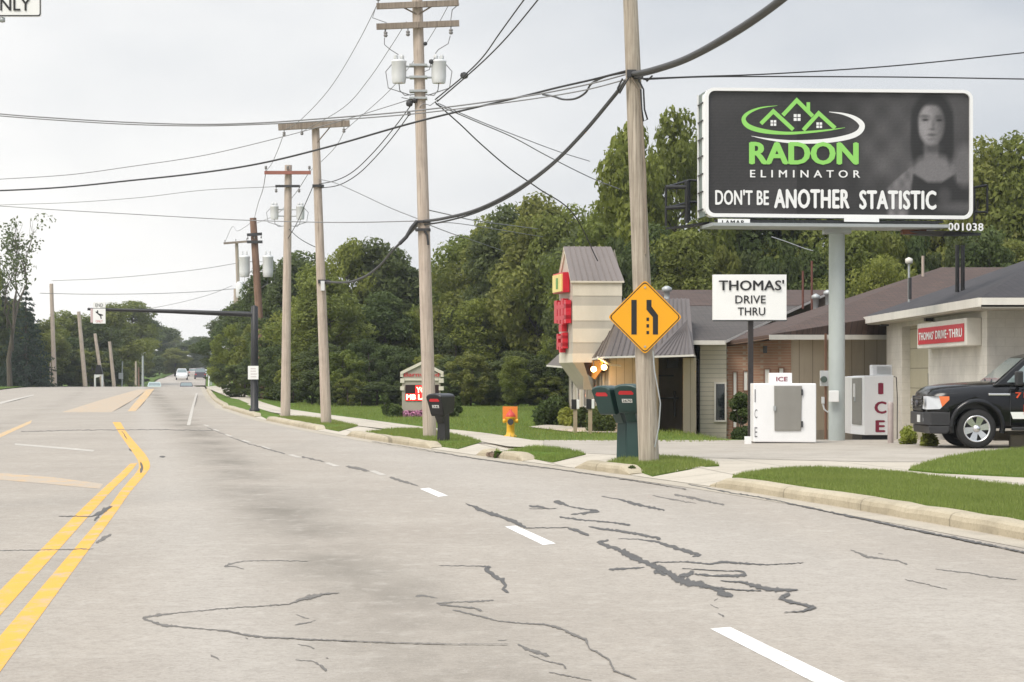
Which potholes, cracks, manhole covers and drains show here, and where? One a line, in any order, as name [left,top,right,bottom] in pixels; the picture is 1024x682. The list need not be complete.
crack [66,506,112,543]
crack [224,560,307,569]
crack [851,550,1015,589]
crack [416,595,636,680]
crack [143,592,507,671]
crack [466,494,724,540]
